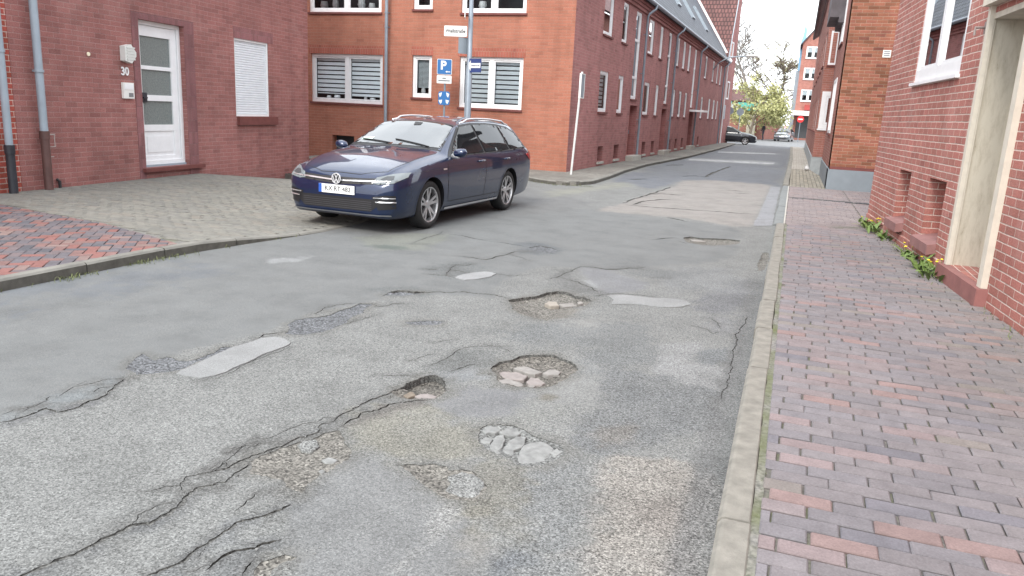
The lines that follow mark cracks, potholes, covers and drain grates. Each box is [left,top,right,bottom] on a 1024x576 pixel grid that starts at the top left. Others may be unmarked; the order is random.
pothole [509,291,591,321]
crack [315,233,528,324]
crack [0,378,128,423]
pothole [390,375,447,399]
pothole [401,464,487,501]
pothole [491,355,578,388]
pothole [478,424,564,466]
crack [696,318,747,398]
crack [20,340,510,576]
